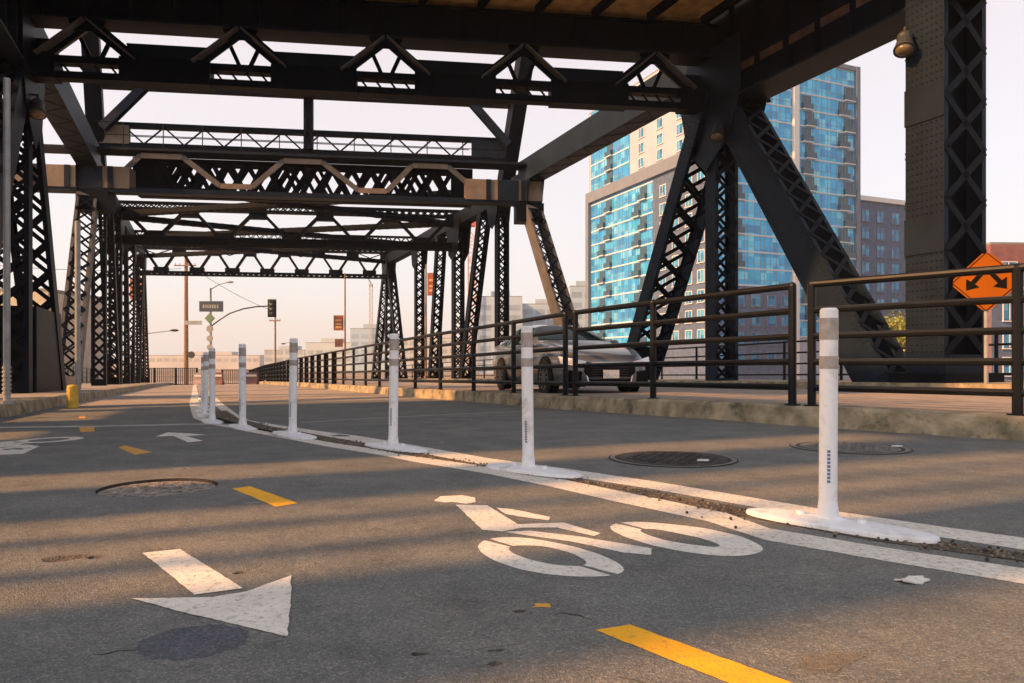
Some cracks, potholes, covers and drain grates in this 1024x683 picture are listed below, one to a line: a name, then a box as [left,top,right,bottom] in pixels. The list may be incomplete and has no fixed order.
manhole cover [609,450,739,467]
manhole cover [789,441,913,454]
manhole cover [95,478,218,497]
